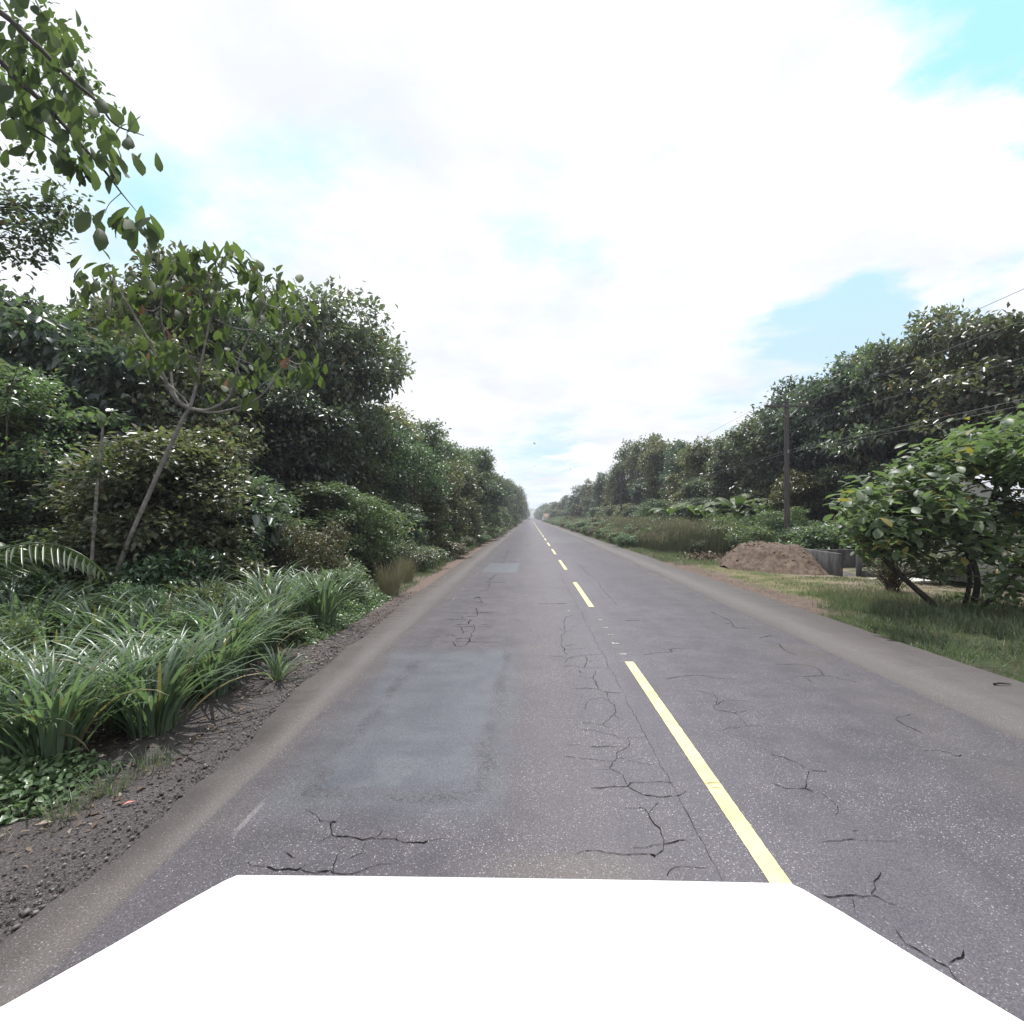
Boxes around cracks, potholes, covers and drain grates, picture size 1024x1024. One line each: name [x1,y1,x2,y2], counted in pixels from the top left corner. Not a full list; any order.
crack [544,603,699,875]
crack [822,872,893,909]
crack [754,745,879,842]
crack [248,809,441,874]
crack [447,578,501,647]
crack [895,929,977,994]
